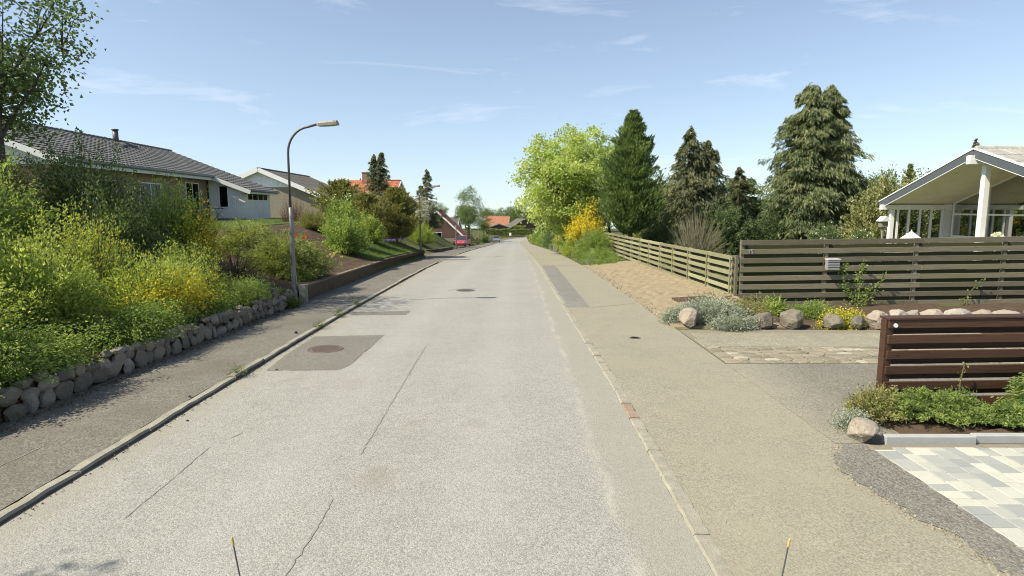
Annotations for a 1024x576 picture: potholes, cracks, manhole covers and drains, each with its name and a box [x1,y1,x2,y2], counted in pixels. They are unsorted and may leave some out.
crack [360,346,426,455]
manhole cover [307,345,343,353]
crack [125,449,207,518]
crack [284,499,333,576]
